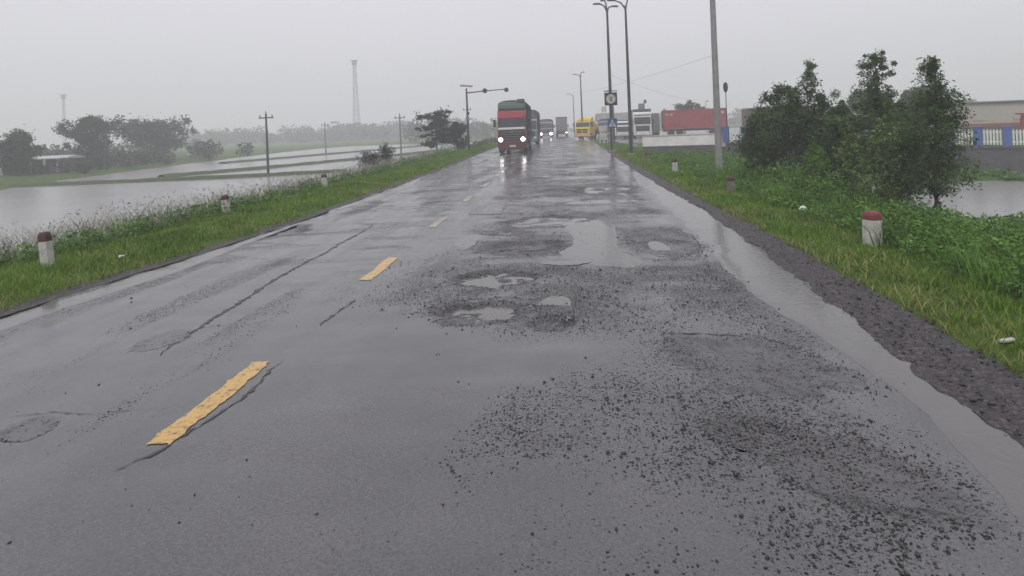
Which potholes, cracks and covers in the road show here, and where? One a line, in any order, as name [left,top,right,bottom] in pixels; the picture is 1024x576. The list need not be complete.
pothole [417,298,533,328]
pothole [618,227,708,261]
pothole [442,268,546,291]
crack [663,332,801,350]
